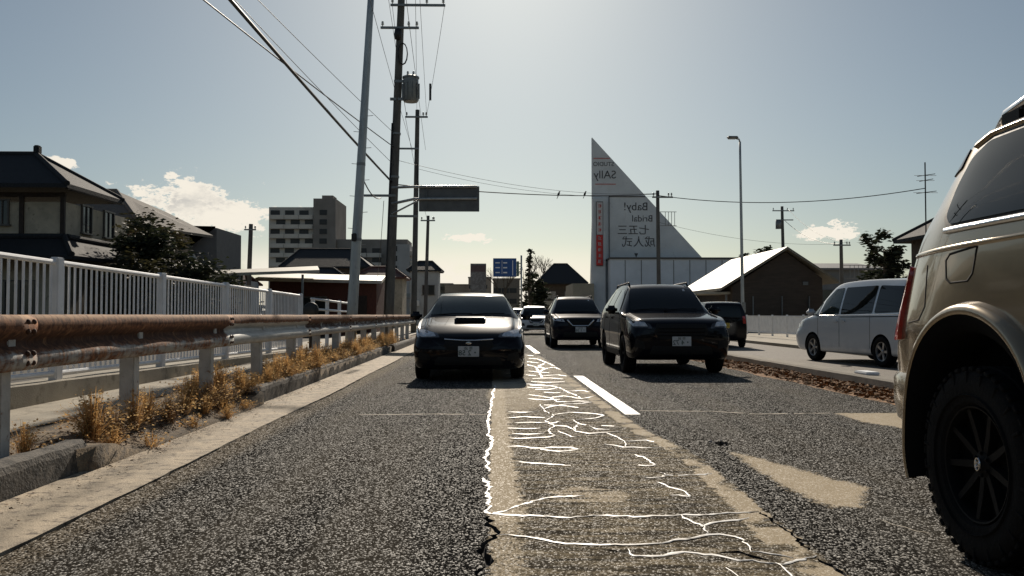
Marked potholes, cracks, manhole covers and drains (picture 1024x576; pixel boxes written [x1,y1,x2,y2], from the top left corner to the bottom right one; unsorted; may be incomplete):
crack [358,355,847,576]
